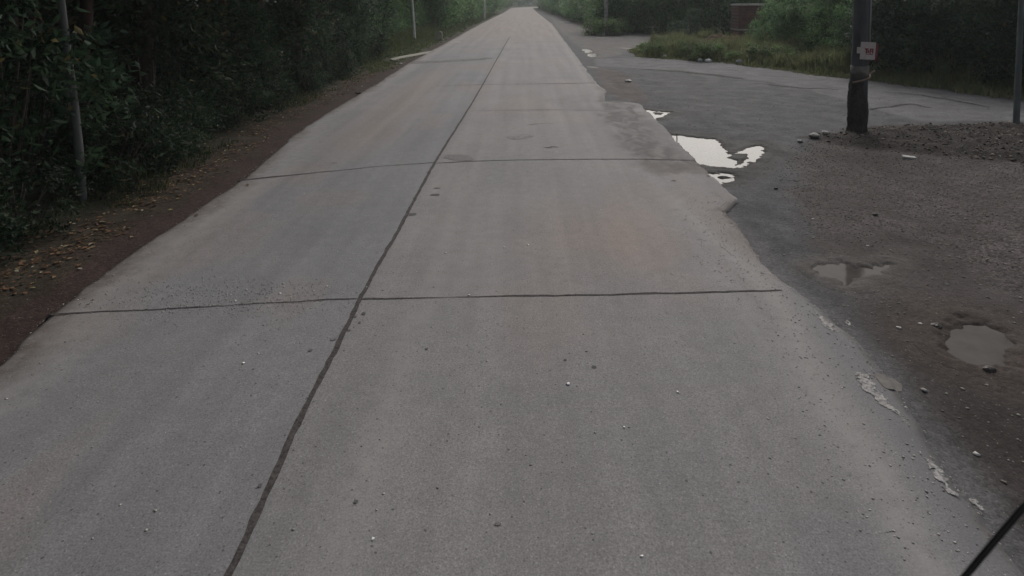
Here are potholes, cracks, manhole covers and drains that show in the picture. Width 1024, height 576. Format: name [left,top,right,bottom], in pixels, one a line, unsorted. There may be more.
pothole [909,306,1024,386]
pothole [794,254,916,295]
